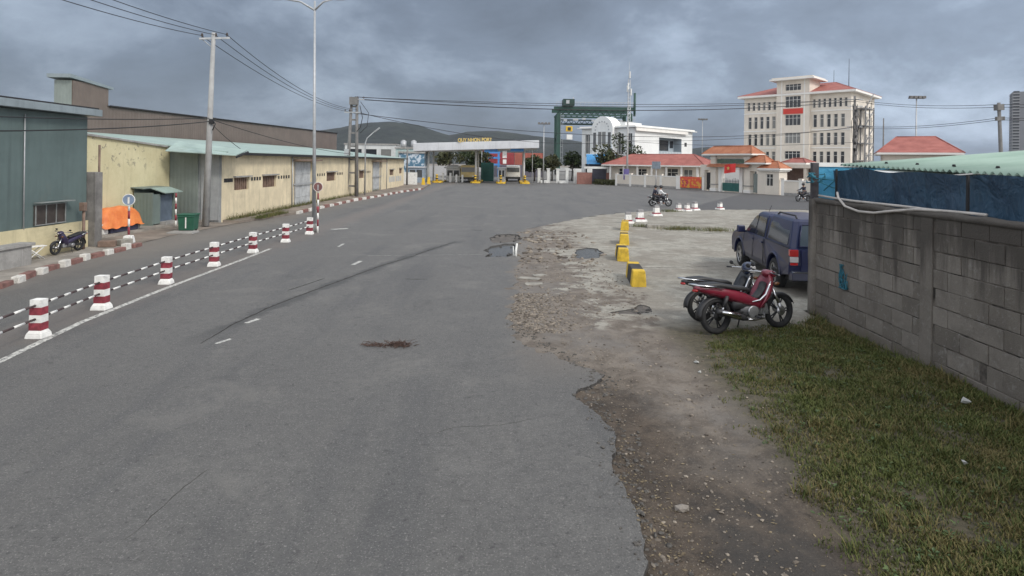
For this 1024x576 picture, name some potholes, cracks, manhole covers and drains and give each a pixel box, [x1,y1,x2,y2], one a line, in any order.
pothole [575,248,603,259]
pothole [610,305,652,314]
pothole [489,234,521,243]
crack [202,243,450,343]
crack [124,470,207,540]
pothole [483,244,518,257]
